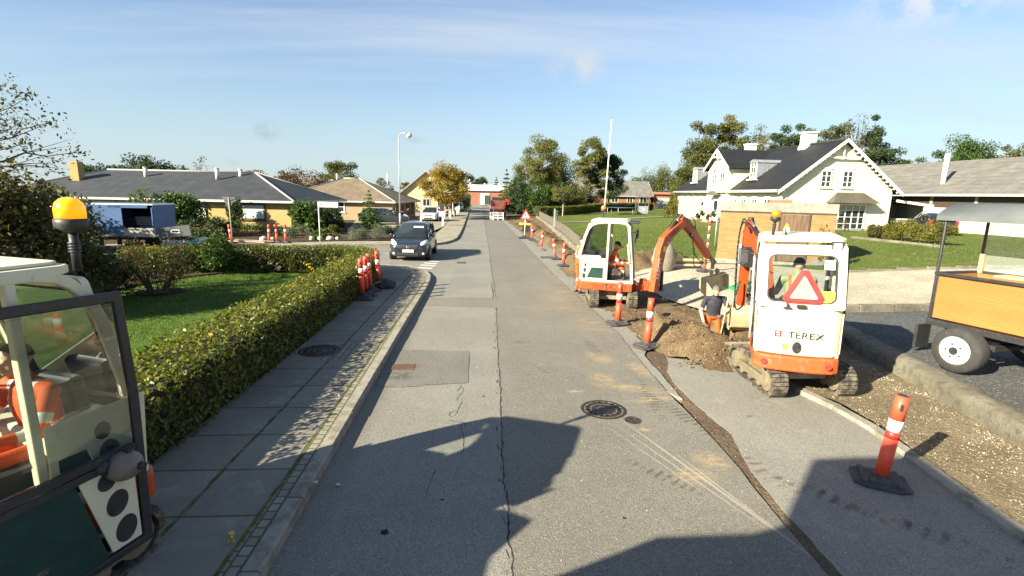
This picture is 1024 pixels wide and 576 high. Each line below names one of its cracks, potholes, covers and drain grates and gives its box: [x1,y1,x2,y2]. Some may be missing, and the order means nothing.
crack [402,350,470,455]
manhole cover [298,344,341,357]
manhole cover [581,400,627,419]
crack [422,215,514,576]
